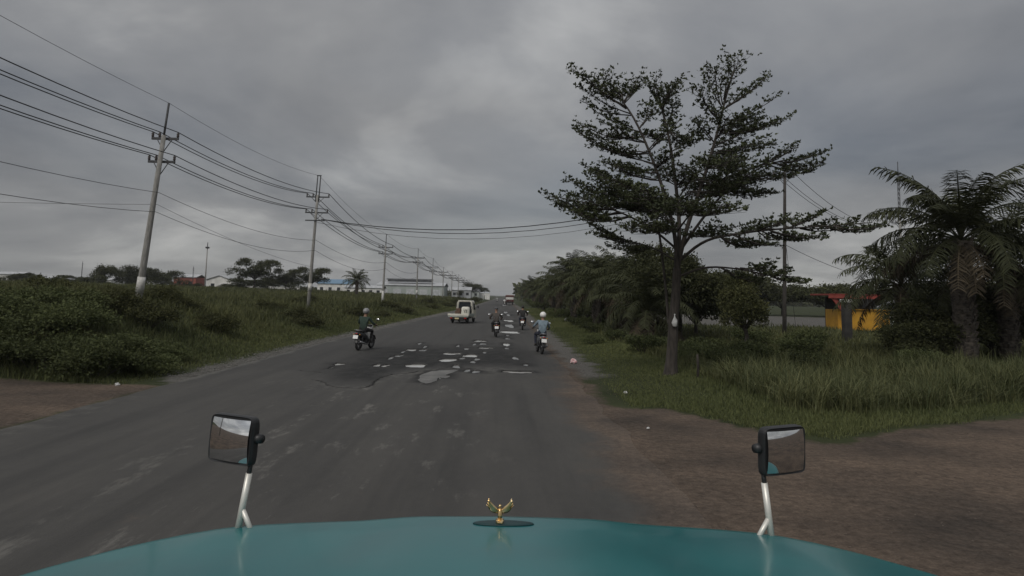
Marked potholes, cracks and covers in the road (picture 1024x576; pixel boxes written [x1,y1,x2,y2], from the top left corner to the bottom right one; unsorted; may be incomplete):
pothole [416,369,459,384]
